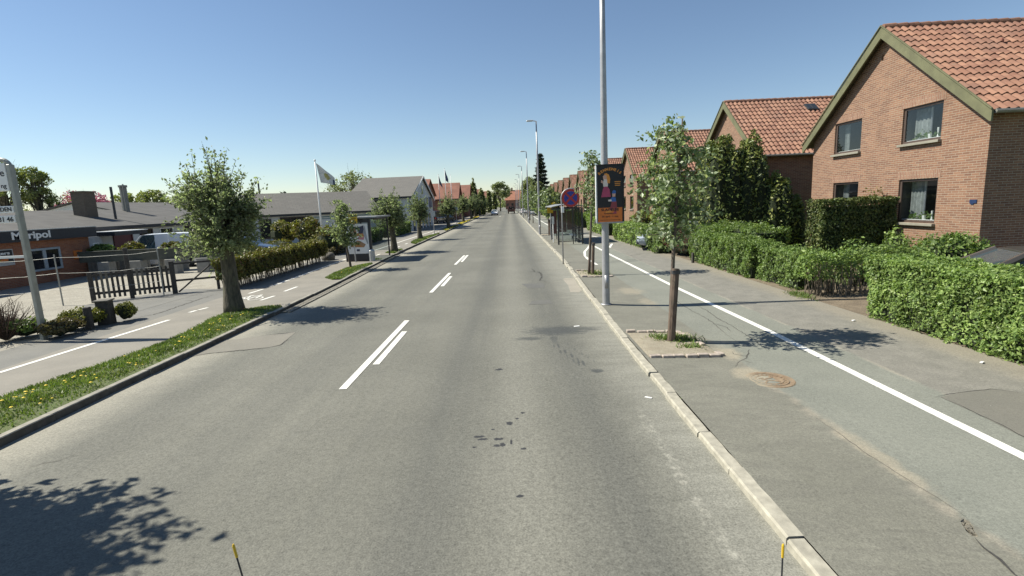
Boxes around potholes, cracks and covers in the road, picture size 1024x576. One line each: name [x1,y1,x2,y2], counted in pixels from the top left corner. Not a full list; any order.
crack [975,538,1017,576]
crack [678,302,762,366]
manhole cover [745,372,796,388]
